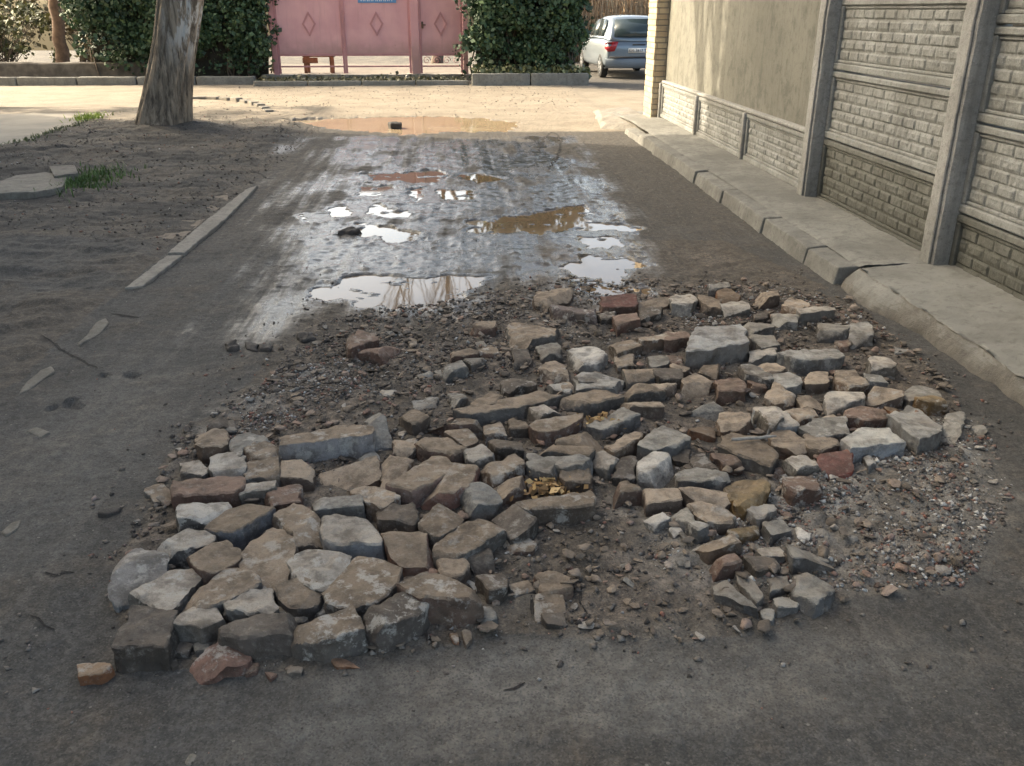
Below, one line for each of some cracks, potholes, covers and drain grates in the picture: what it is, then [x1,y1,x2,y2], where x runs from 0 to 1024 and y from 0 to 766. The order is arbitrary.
pothole [455,172,509,184]
pothole [464,204,645,236]
crack [42,335,98,368]
pothole [355,183,398,196]
pothole [351,221,428,245]
pothole [438,188,476,200]
pothole [326,204,353,217]
pothole [342,200,412,219]
pothole [556,253,653,295]
pothole [99,274,990,682]
pothole [358,168,450,183]
